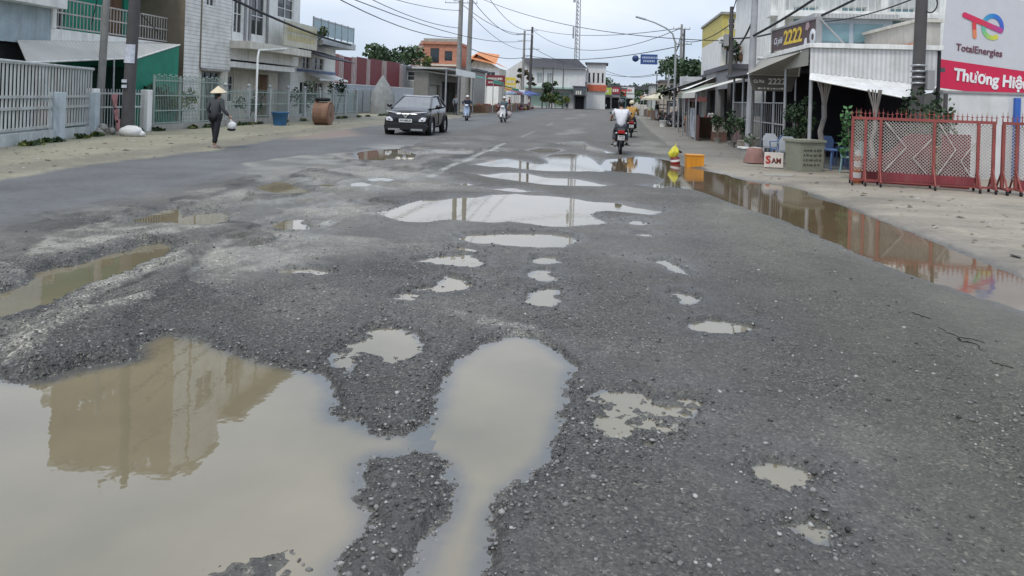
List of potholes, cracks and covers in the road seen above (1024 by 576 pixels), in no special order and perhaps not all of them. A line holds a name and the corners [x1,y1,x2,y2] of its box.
pothole [117,204,240,226]
pothole [463,170,617,186]
pothole [722,444,853,503]
pothole [467,152,612,172]
pothole [350,147,422,160]
pothole [757,501,866,557]
pothole [578,376,728,456]
crack [911,312,1013,368]
pothole [366,191,673,227]
pothole [0,324,439,576]
pothole [402,249,497,269]
pothole [378,270,486,302]
